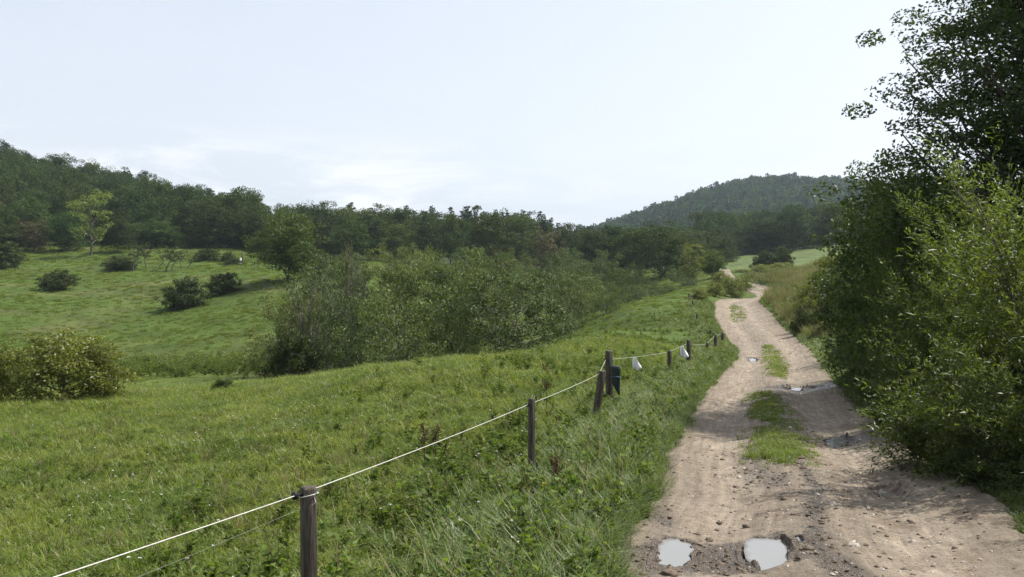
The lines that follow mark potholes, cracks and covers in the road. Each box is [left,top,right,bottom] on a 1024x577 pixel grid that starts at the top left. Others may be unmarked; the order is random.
pothole [735,530,799,575]
pothole [776,383,824,392]
pothole [646,533,700,570]
pothole [818,432,855,450]
